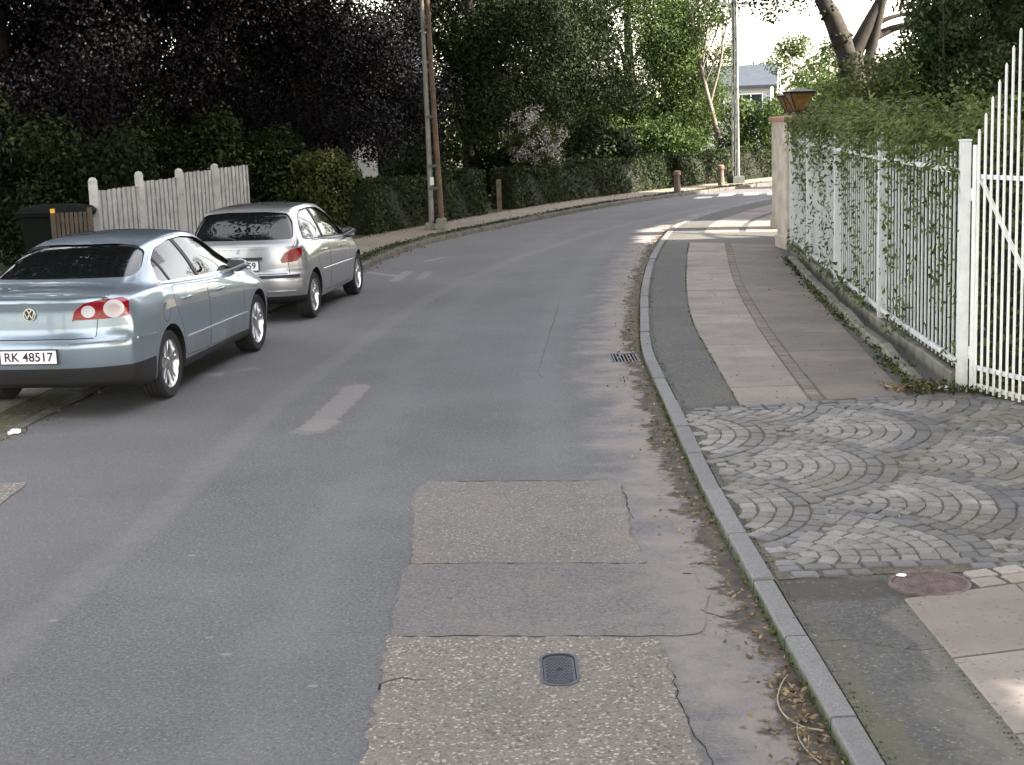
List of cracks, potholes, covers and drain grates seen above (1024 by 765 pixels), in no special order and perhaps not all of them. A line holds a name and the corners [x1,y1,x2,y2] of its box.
crack [662,651,713,765]
crack [378,677,429,690]
manhole cover [888,570,972,597]
drain grate [608,353,641,363]
utility cover [539,652,580,686]
